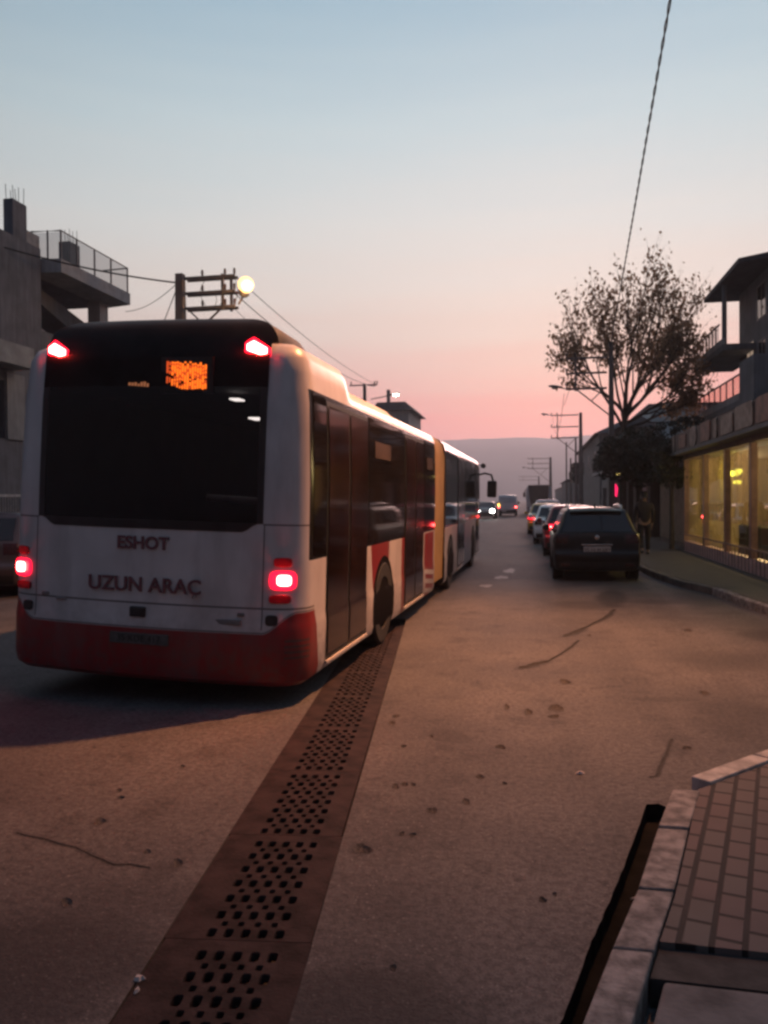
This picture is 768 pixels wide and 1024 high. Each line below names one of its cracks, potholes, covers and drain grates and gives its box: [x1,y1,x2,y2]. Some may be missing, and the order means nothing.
pothole [352,843,374,853]
crack [17,833,150,868]
crack [650,739,673,778]
crack [518,609,615,669]
